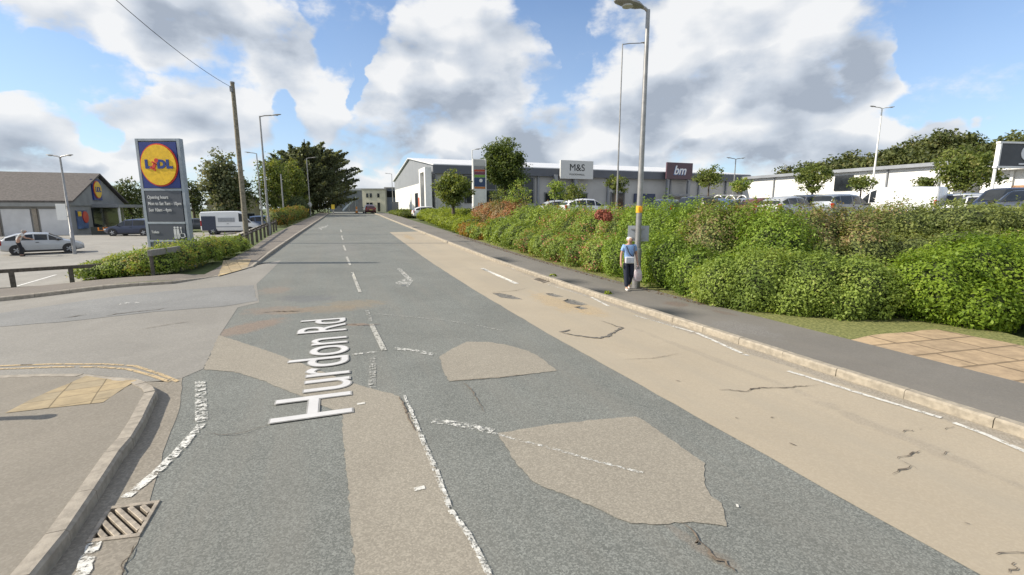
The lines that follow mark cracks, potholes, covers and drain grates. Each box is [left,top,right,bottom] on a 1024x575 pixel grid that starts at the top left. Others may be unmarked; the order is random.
drain grate [86,500,161,543]
crack [683,523,735,571]
